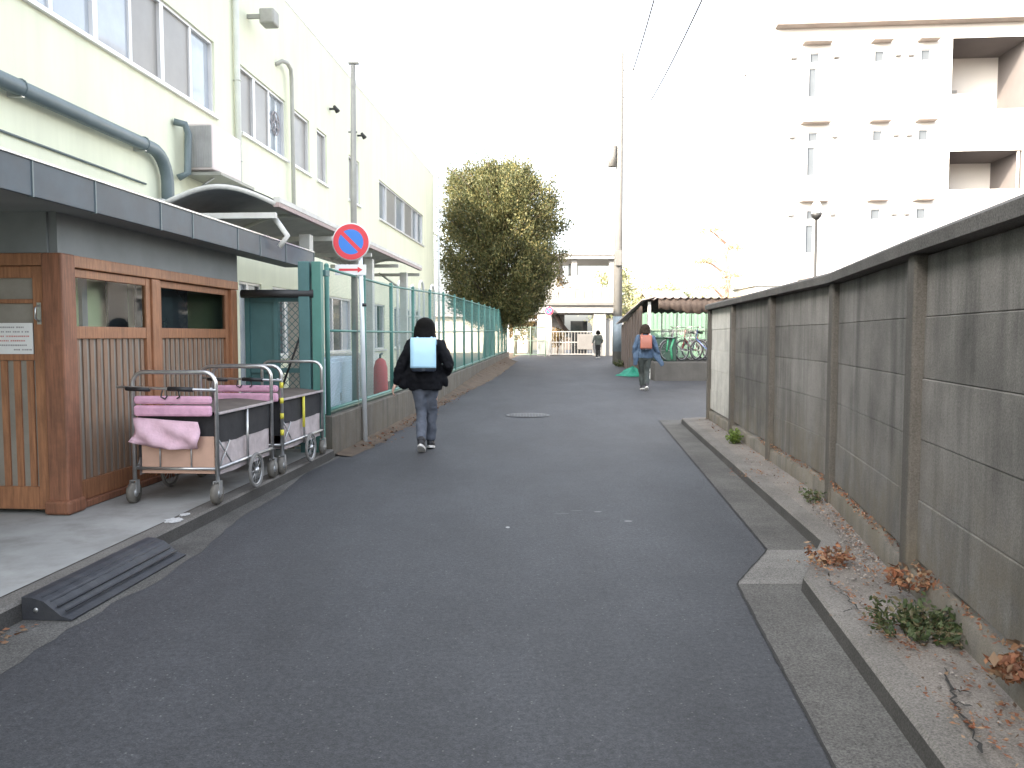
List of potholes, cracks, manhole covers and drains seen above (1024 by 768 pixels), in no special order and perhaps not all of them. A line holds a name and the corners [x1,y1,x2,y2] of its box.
crack [944,667,983,753]
